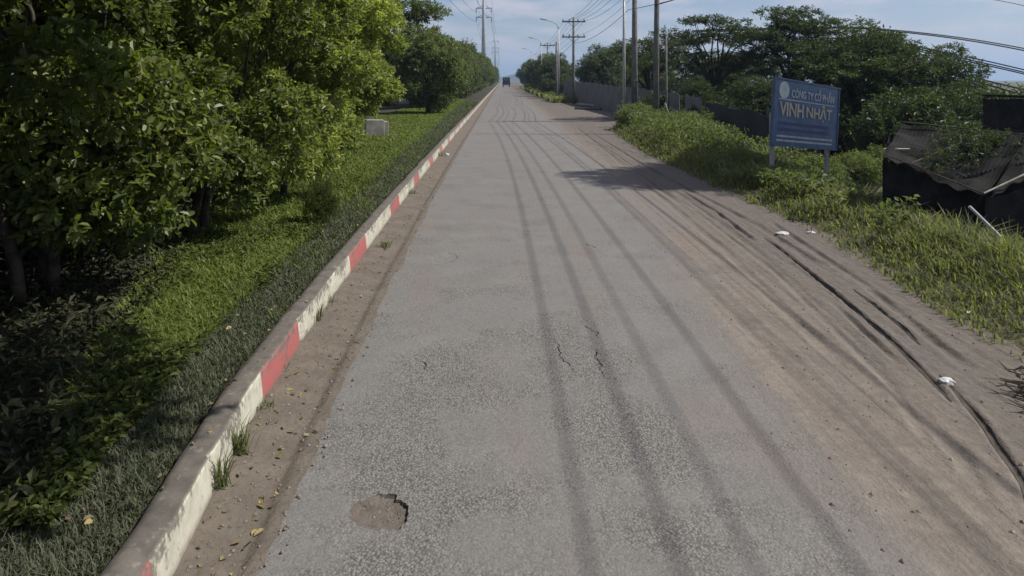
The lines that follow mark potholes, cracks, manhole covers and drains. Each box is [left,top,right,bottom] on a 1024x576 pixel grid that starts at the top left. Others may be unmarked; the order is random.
pothole [347,493,409,531]
